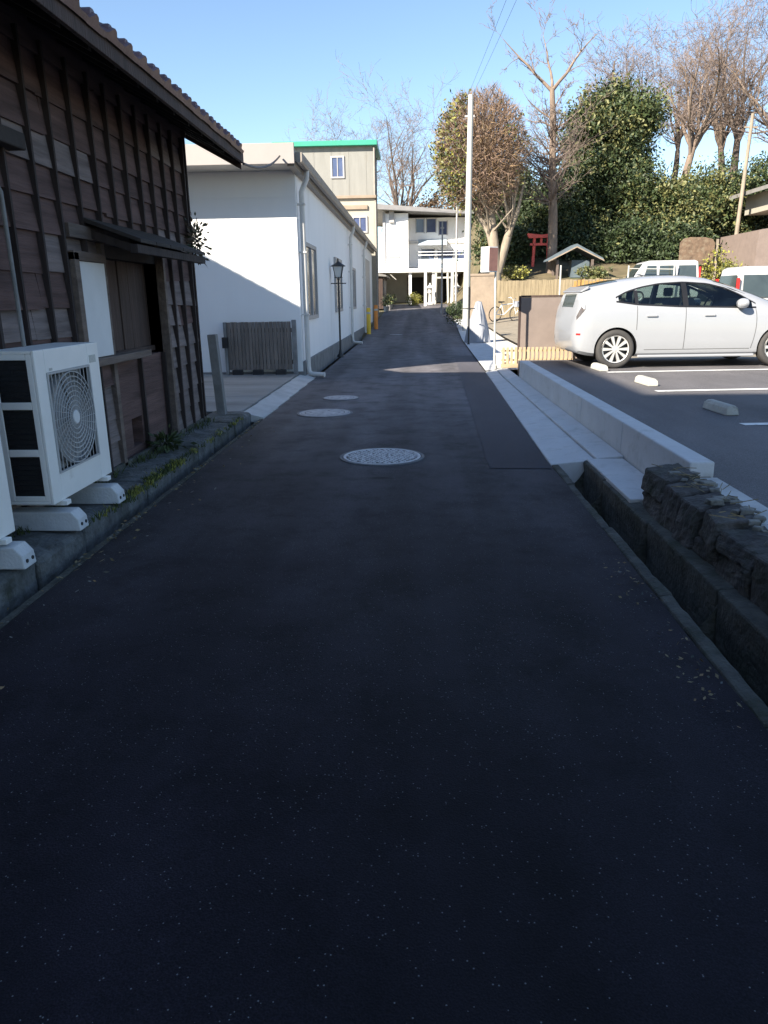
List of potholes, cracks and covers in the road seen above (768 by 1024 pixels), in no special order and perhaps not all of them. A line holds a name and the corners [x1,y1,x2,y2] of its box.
manhole cover [297,409,353,418]
manhole cover [340,448,424,466]
